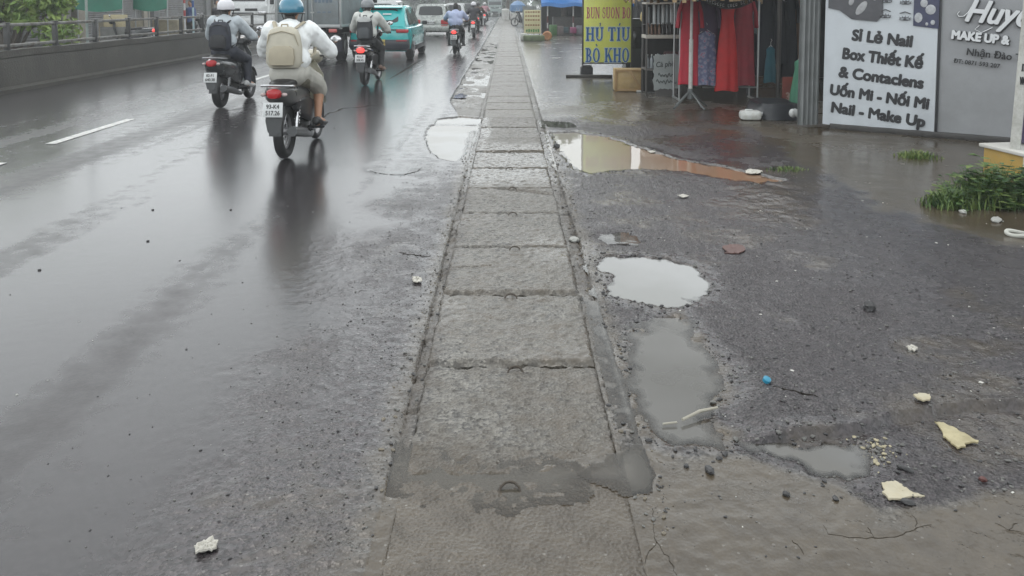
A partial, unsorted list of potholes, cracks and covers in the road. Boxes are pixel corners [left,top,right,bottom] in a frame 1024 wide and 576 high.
pothole [744,423,892,496]
crack [645,509,677,575]
pothole [589,300,754,492]
pothole [584,252,717,311]
pothole [544,131,796,185]
pothole [420,116,483,164]
crack [823,515,932,539]
